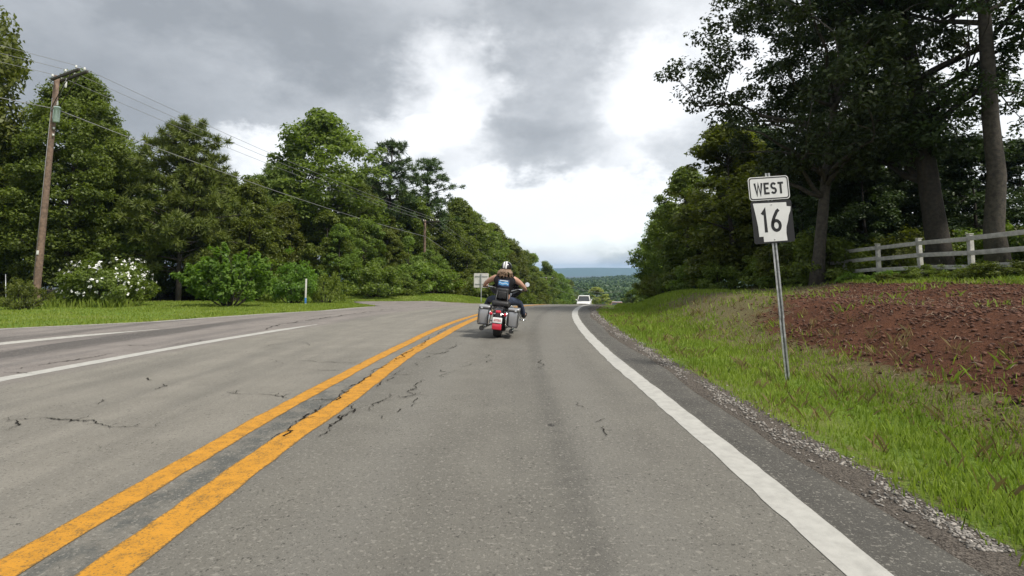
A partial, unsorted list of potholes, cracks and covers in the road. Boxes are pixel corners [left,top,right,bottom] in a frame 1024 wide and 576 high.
crack [269,325,491,440]
crack [8,400,160,430]
